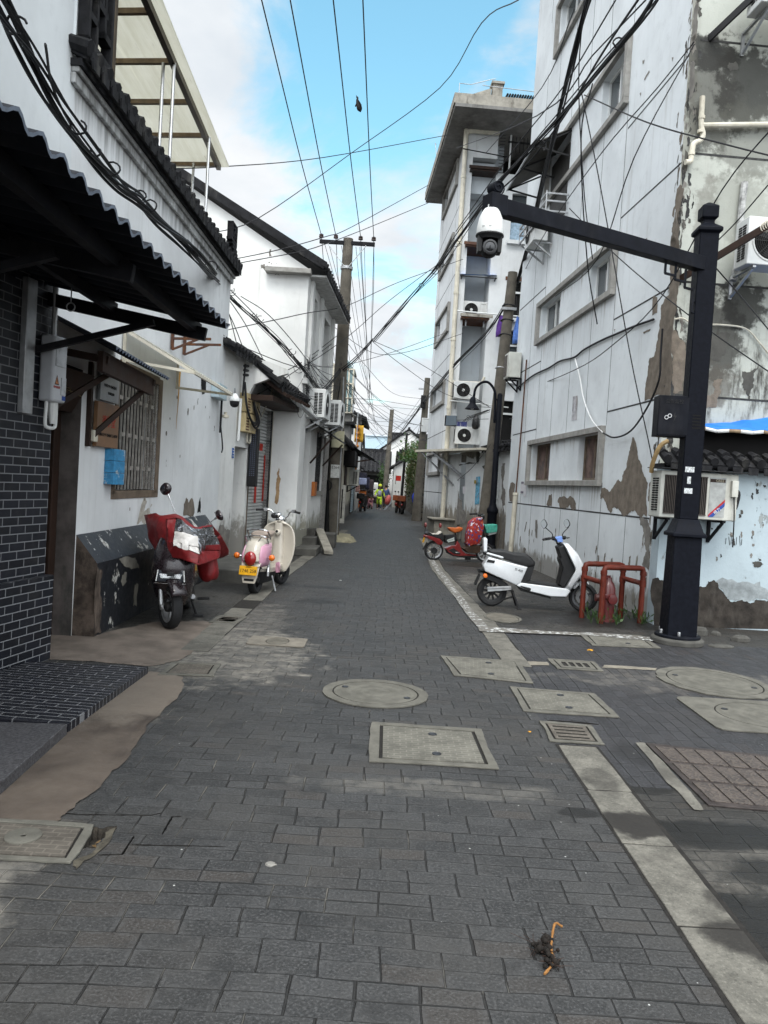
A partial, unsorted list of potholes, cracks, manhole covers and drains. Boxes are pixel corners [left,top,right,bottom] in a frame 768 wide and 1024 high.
pothole [73,826,117,869]
manhole cover [440,655,533,684]
manhole cover [677,696,768,734]
drain grate [548,658,604,672]
manhole cover [246,636,308,648]
manhole cover [0,818,94,864]
manhole cover [655,667,768,699]
drain grate [539,721,605,745]
manhole cover [510,686,619,718]
manhole cover [322,679,428,709]
manhole cover [368,721,499,770]
